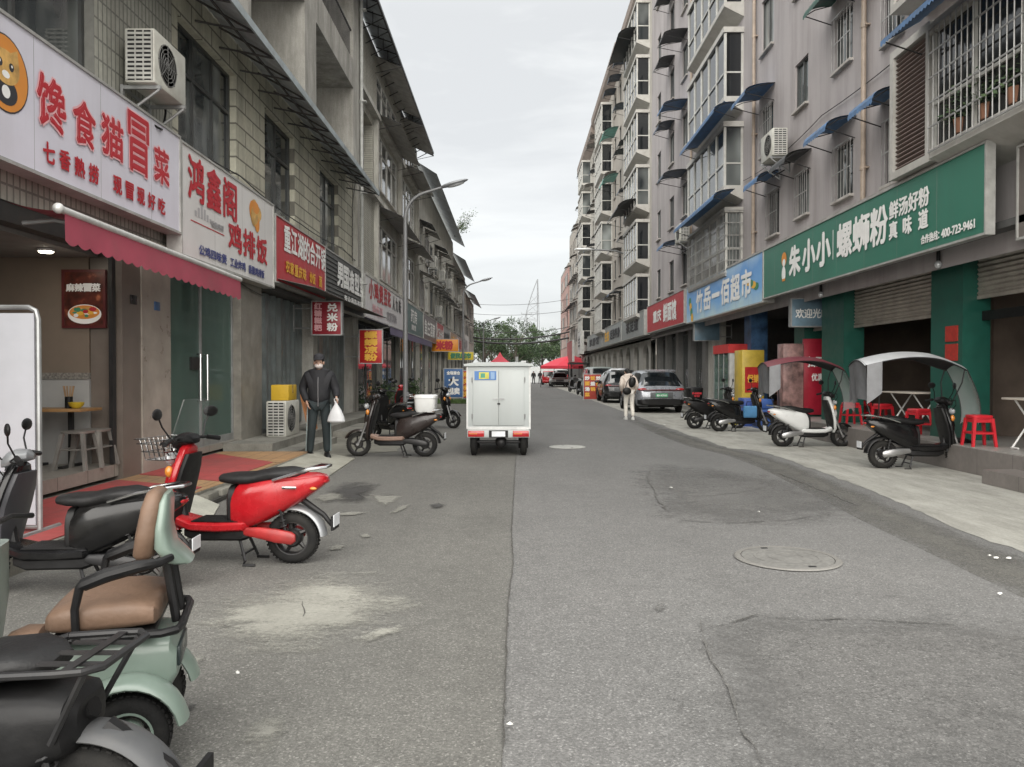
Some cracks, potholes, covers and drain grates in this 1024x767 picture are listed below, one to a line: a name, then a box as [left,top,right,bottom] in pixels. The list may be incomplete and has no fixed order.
crack [646,468,860,522]
manhole cover [734,546,843,571]
crack [683,603,953,761]
